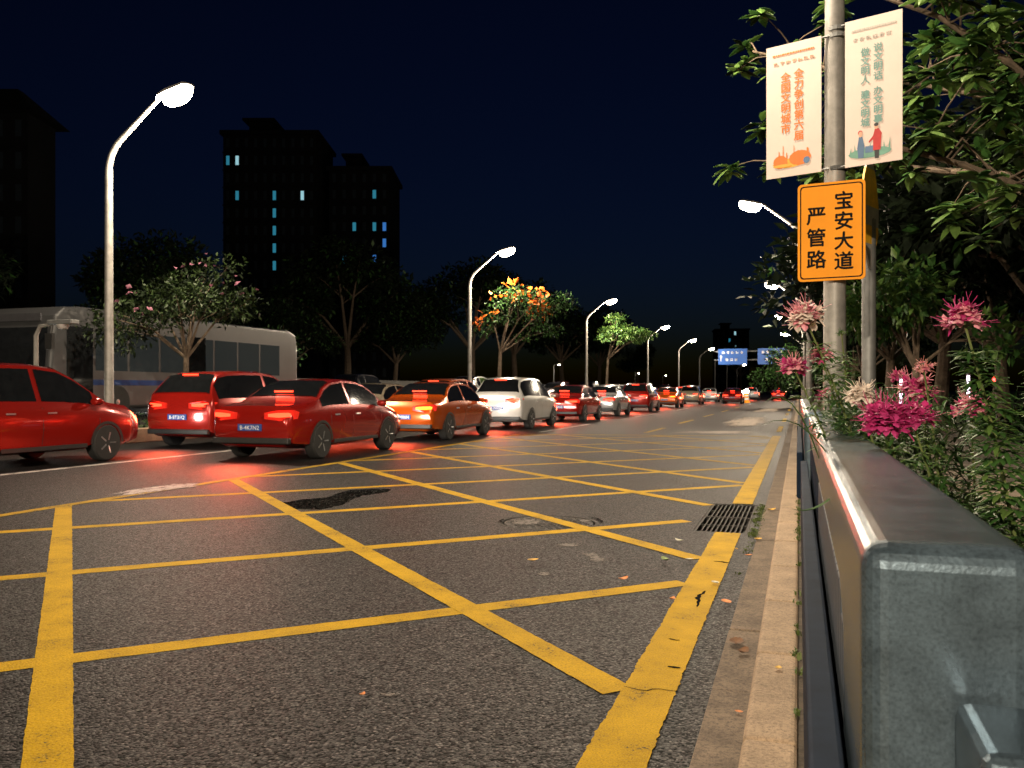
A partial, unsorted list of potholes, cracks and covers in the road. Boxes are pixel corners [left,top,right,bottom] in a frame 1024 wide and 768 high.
pothole [287,490,389,510]
manhole cover [498,515,600,531]
drain grate [694,516,753,533]
drain grate [705,504,757,533]
